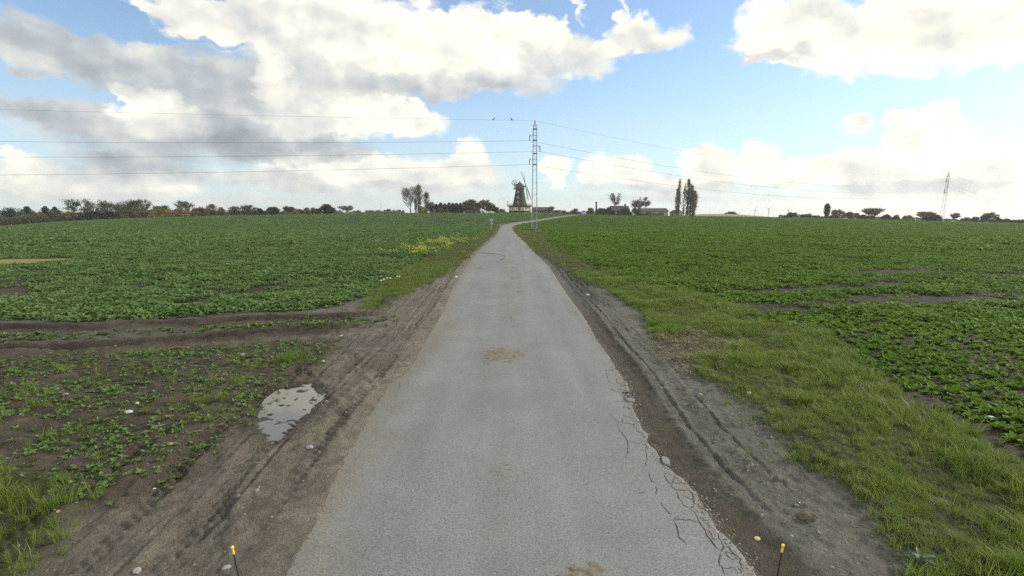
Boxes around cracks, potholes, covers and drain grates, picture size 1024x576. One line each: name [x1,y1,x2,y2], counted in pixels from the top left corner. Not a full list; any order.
crack [606,371,743,574]
